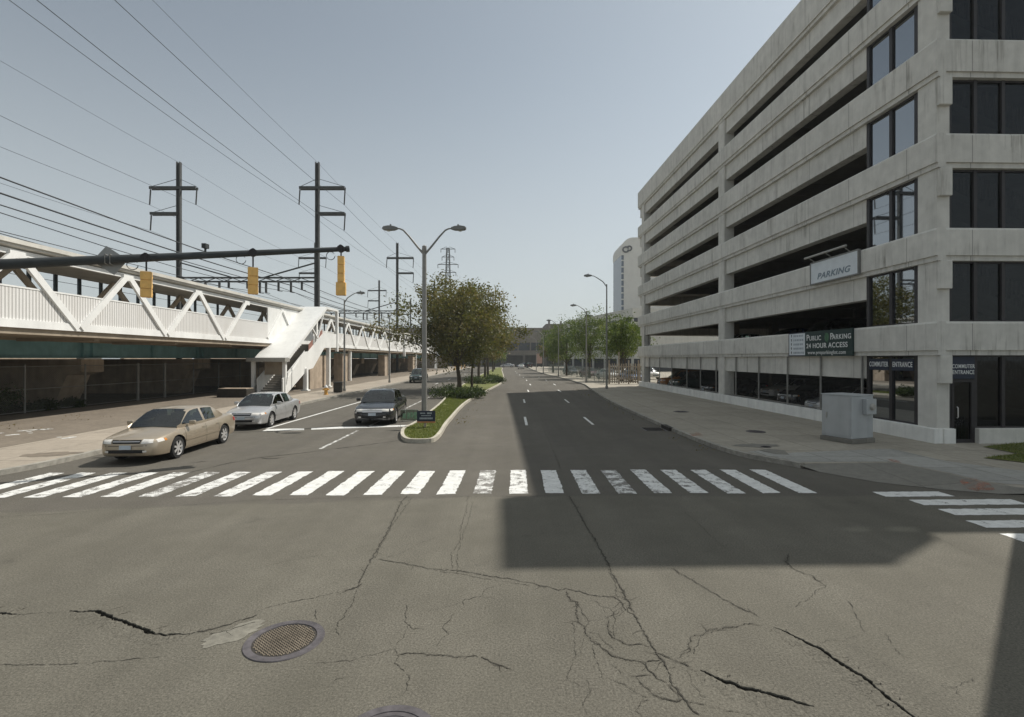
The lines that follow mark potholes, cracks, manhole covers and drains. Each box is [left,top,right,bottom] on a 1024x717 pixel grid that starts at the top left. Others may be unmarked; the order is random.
crack [193,496,758,714]
manhole cover [242,620,325,663]
manhole cover [358,705,431,717]
